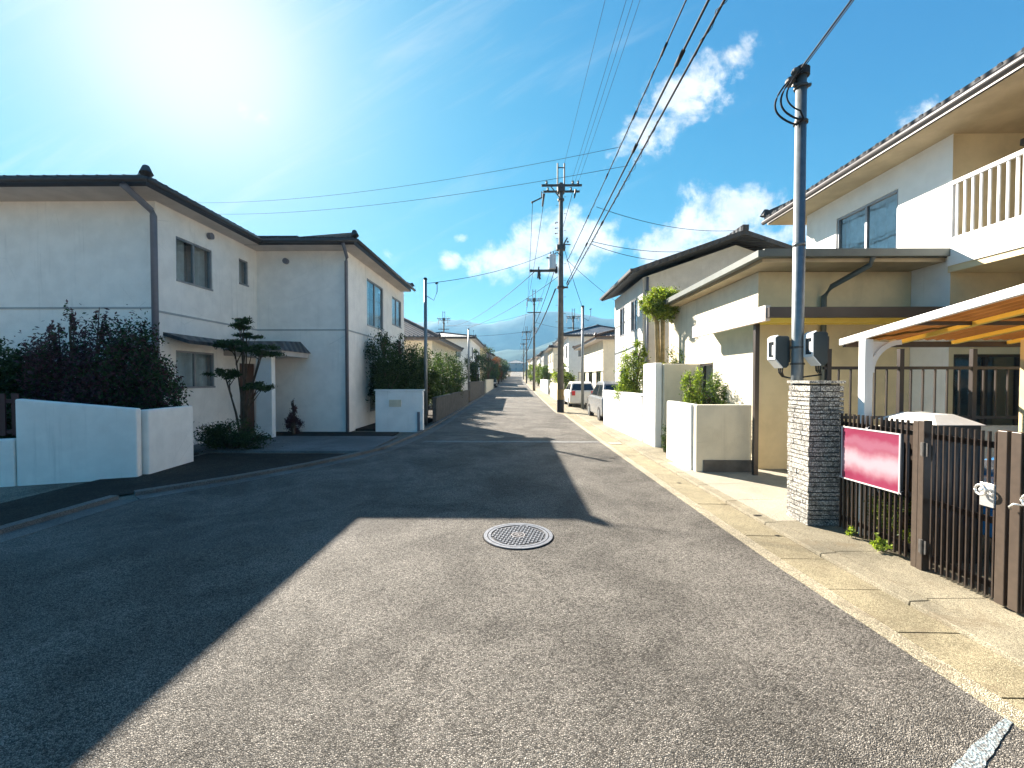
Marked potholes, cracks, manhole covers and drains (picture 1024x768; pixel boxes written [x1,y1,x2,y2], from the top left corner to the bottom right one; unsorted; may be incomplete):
manhole cover [483,523,554,550]
